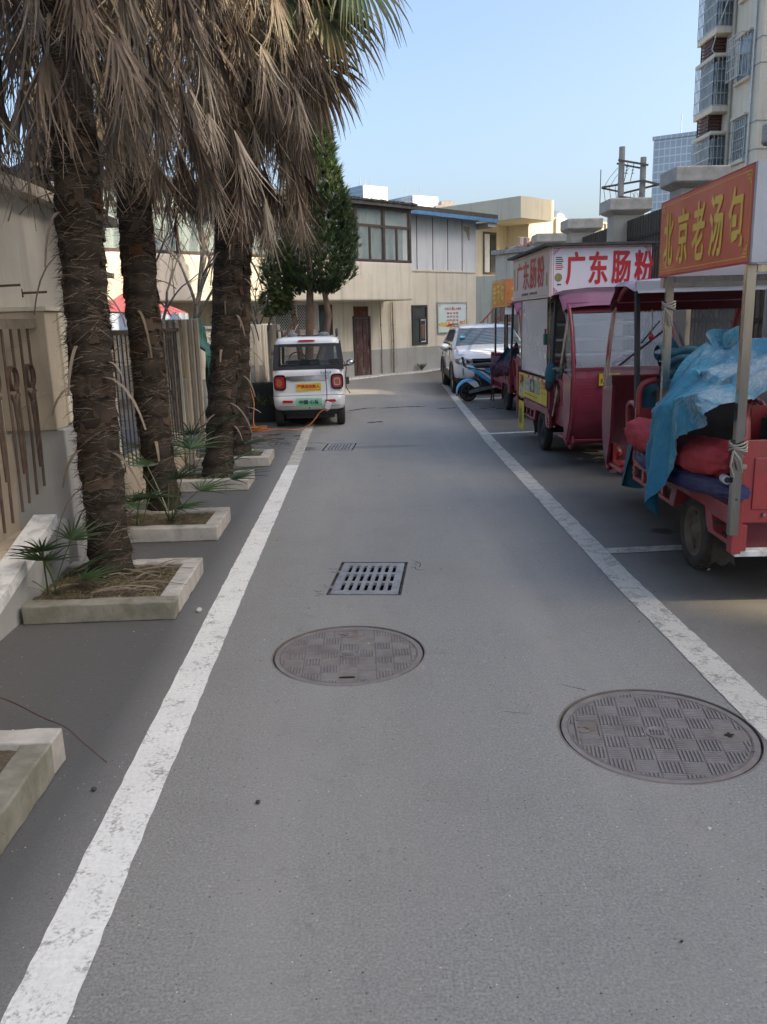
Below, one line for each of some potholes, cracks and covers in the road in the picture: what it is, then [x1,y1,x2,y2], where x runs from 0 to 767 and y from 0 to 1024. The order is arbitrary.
drain grate [324,562,408,595]
drain grate [322,443,357,451]
manhole cover [557,689,766,785]
manhole cover [271,625,426,686]
